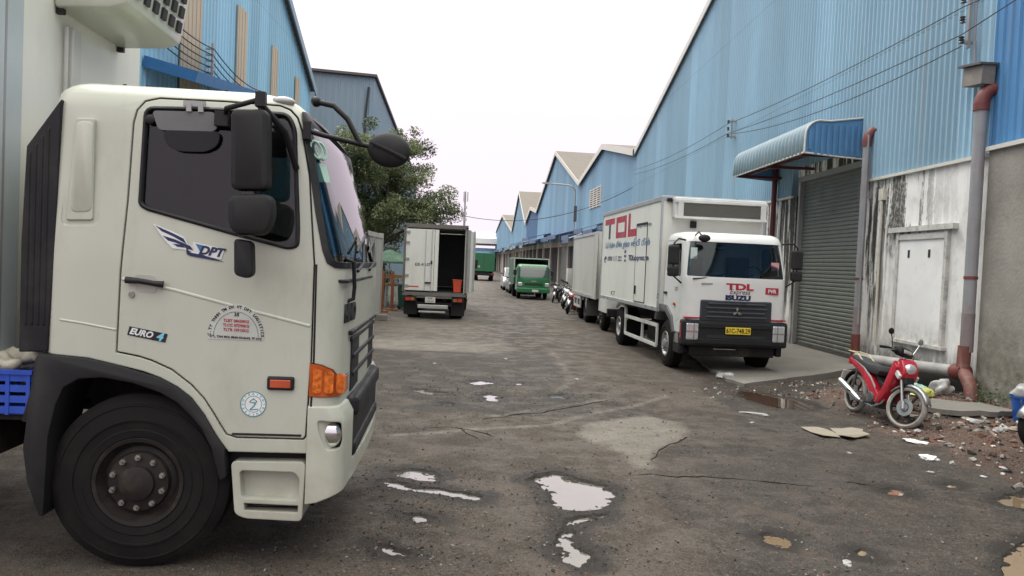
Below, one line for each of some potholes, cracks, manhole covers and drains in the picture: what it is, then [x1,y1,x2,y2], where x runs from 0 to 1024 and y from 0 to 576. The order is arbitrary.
pothole [553,511,611,568]
pothole [375,477,484,500]
pothole [480,392,502,402]
pothole [376,543,414,557]
pothole [993,492,1024,508]
pothole [1000,539,1024,576]
pothole [400,512,439,523]
pothole [388,468,444,481]
pothole [524,471,618,511]
crack [639,436,809,486]
crack [429,400,607,440]
pothole [736,390,820,410]
